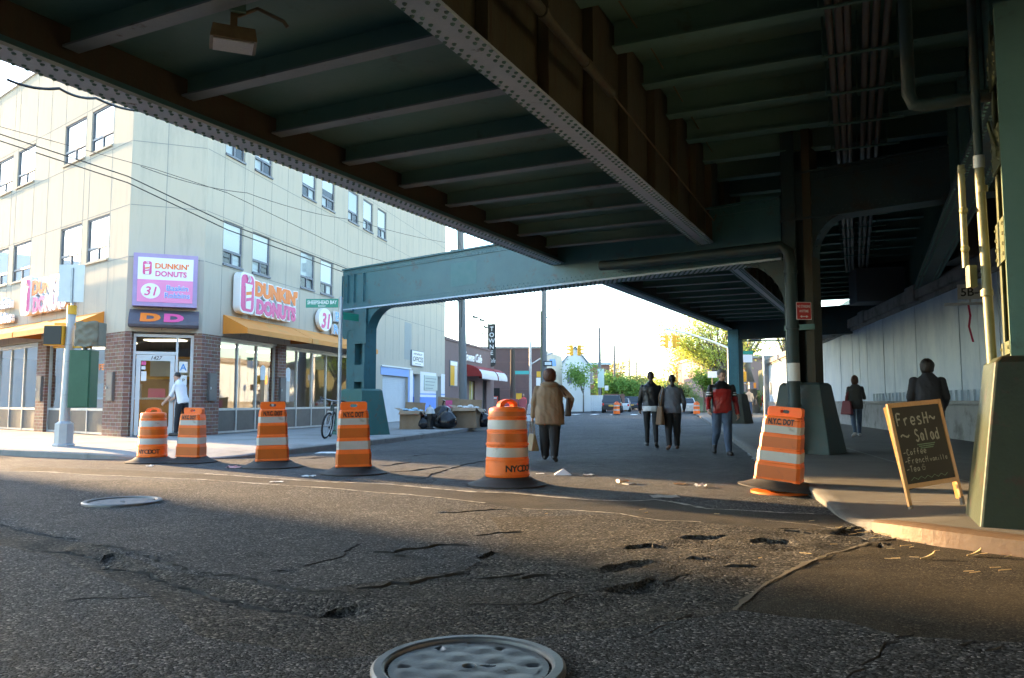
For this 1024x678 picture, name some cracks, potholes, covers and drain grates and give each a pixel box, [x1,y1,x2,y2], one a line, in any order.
pothole [597,559,655,573]
pothole [750,537,800,546]
pothole [599,577,662,595]
pothole [313,604,364,619]
crack [280,531,587,605]
manhole cover [81,496,163,507]
manhole cover [370,635,566,678]
